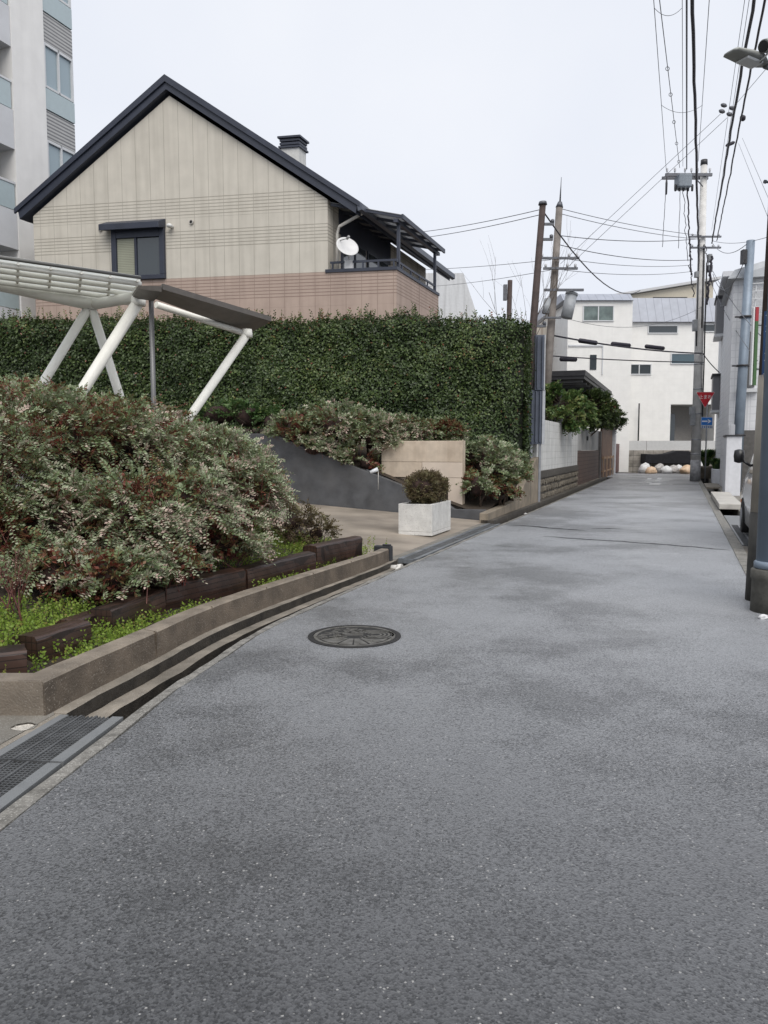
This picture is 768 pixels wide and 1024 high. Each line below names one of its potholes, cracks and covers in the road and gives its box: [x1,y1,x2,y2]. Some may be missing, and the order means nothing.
manhole cover [308,625,401,648]
drain grate [0,760,61,813]
drain grate [0,714,123,768]
